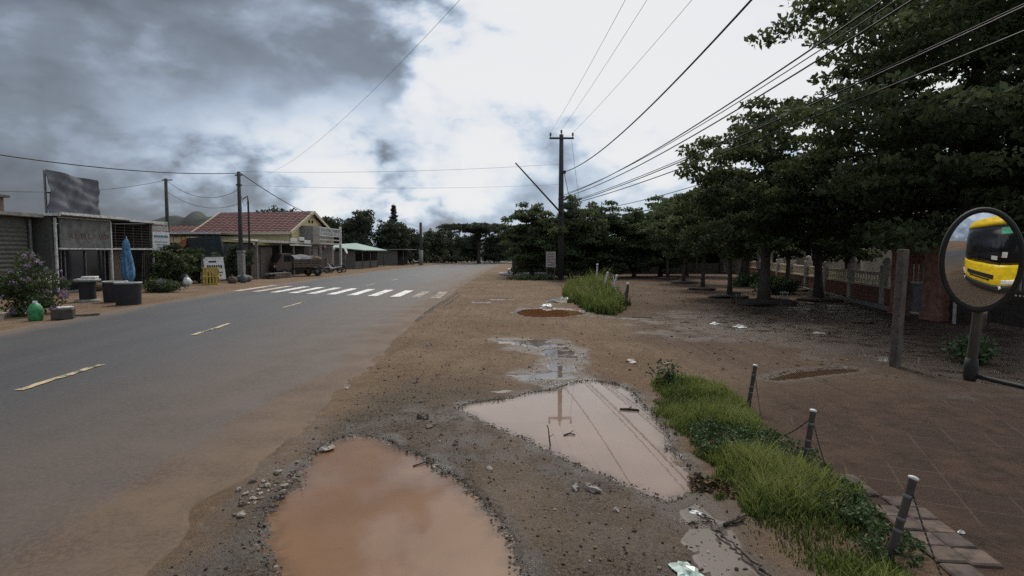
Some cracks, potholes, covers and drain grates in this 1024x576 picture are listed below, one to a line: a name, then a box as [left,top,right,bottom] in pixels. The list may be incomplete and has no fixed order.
pothole [505,306,595,319]
pothole [230,430,553,576]
pothole [756,365,873,383]
pothole [444,376,718,512]
